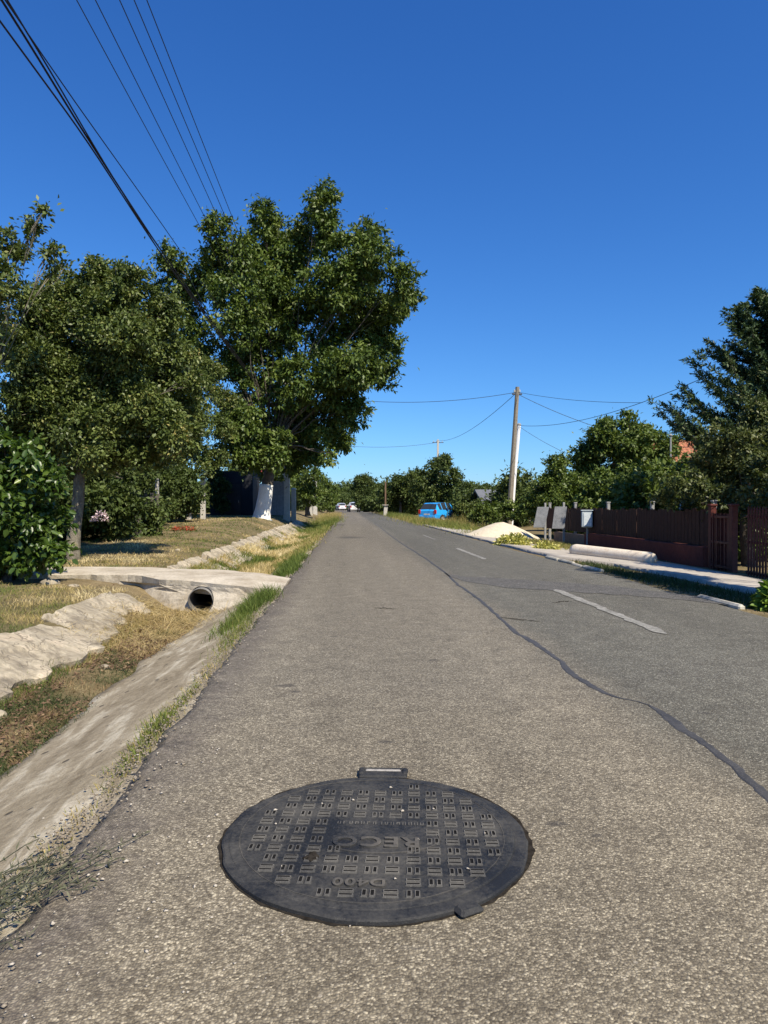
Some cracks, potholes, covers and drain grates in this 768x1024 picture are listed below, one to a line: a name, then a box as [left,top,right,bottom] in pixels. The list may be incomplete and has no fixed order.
manhole cover [217,767,535,927]
